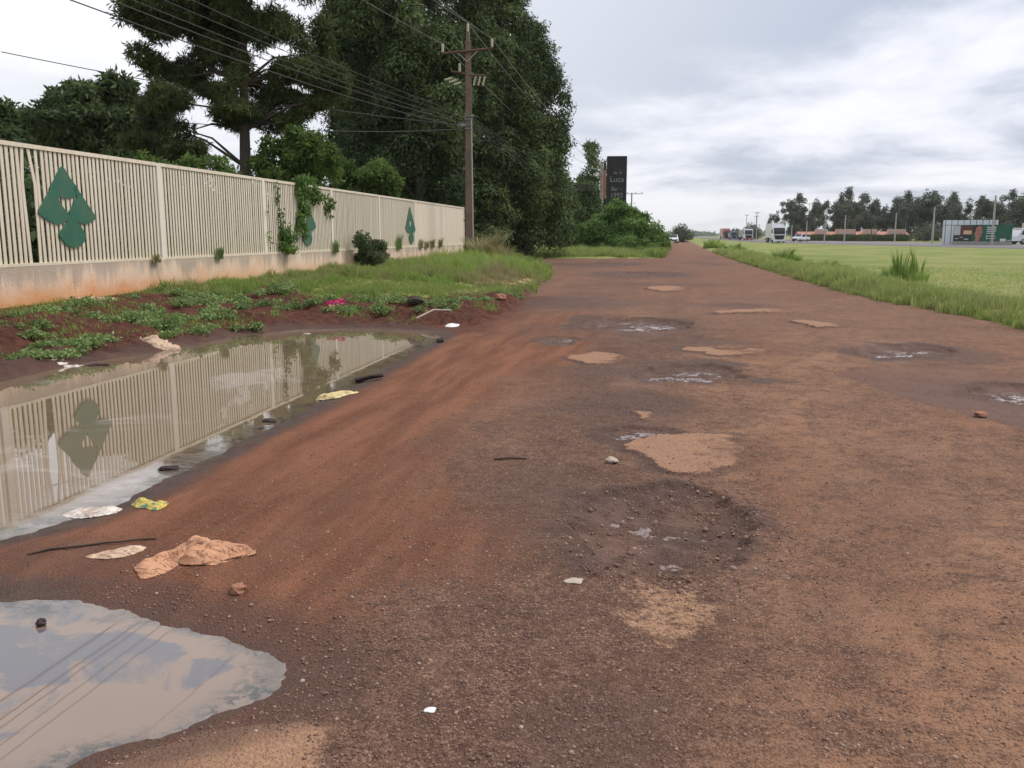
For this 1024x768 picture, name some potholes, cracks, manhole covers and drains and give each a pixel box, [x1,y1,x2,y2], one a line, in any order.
pothole [567,315,698,332]
pothole [531,335,586,346]
pothole [555,478,771,579]
pothole [956,381,1024,406]
pothole [845,342,962,359]
pothole [630,362,755,385]
